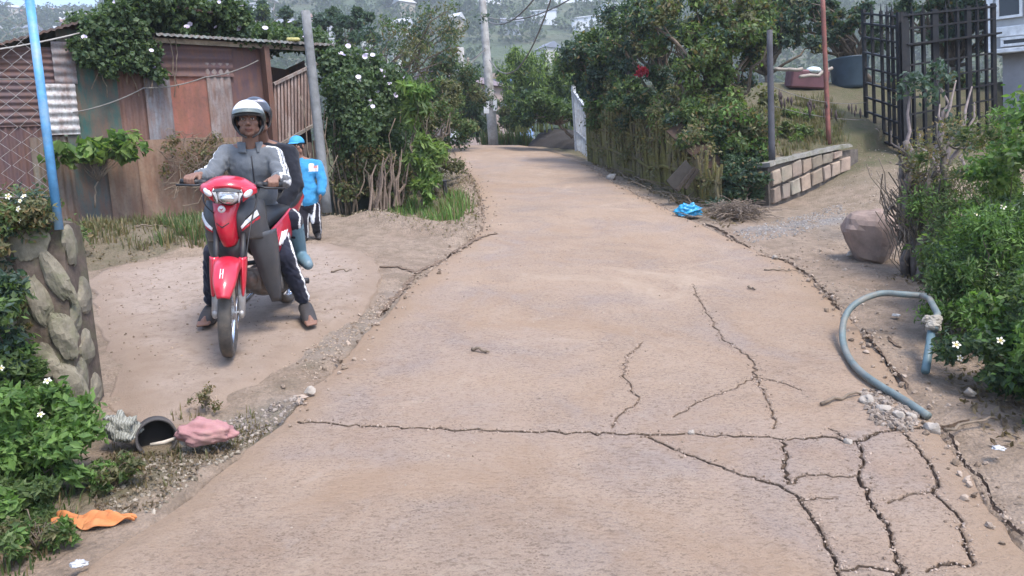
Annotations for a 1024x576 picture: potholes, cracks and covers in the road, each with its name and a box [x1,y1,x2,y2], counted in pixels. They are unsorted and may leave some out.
crack [297,284,1024,576]
crack [377,233,498,317]
crack [705,223,840,310]
